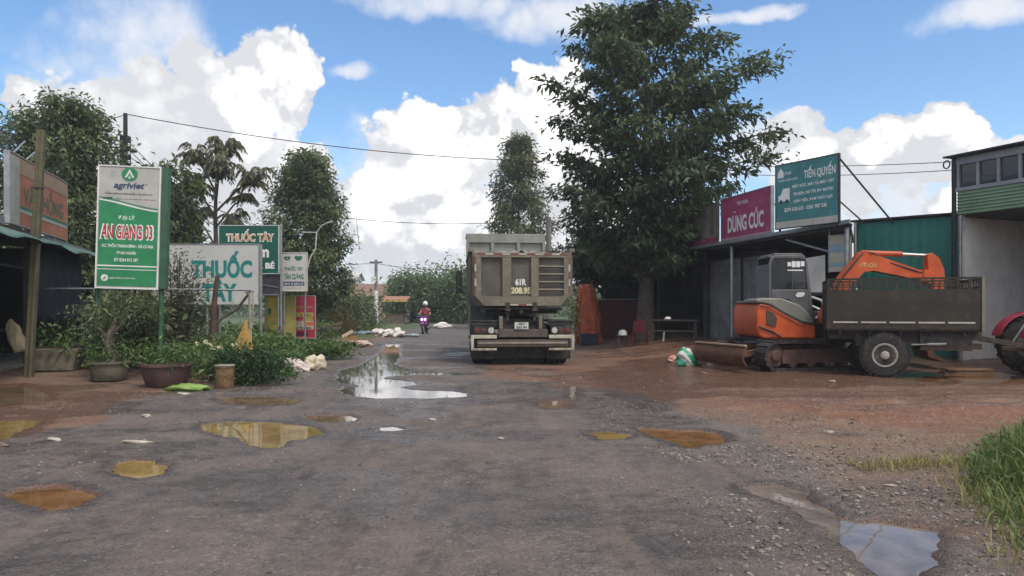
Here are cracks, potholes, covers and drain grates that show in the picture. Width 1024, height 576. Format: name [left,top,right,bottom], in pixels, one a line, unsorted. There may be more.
pothole [209,394,313,407]
pothole [532,397,580,410]
pothole [627,425,740,449]
pothole [96,455,184,481]
pothole [581,429,644,441]
pothole [193,419,337,450]
pothole [295,411,369,424]
pothole [0,481,121,514]
pothole [728,479,976,576]
pothole [330,344,485,400]
